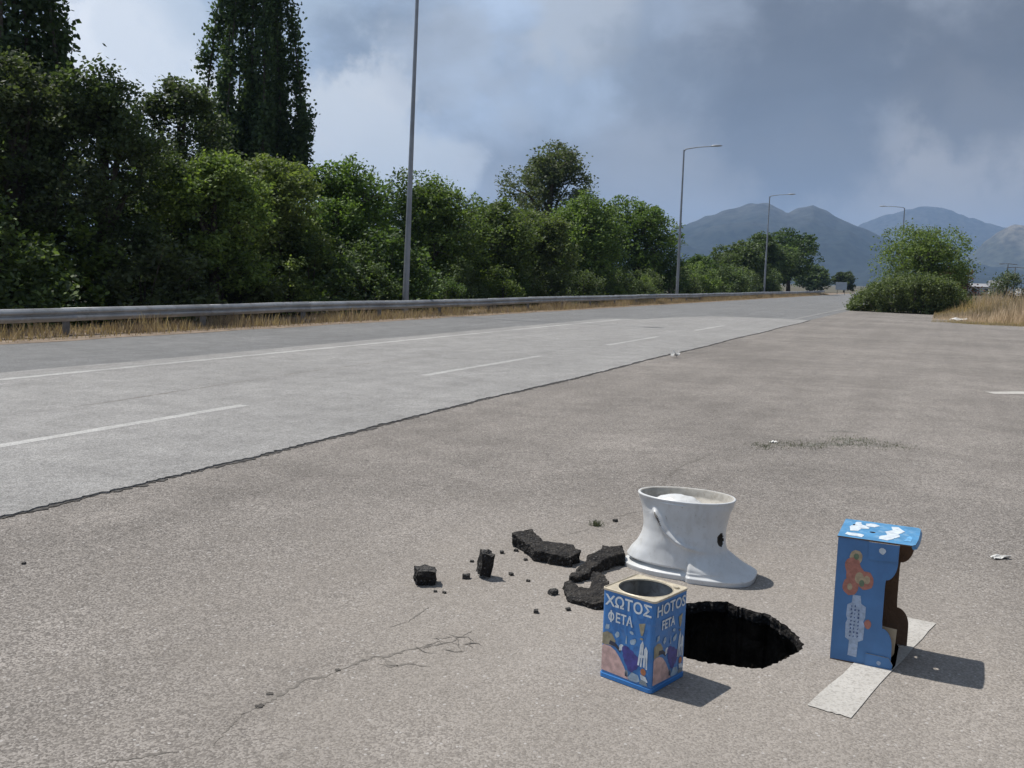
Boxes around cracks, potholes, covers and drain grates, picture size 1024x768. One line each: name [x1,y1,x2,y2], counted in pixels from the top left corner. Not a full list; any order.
crack [213,631,481,745]
pothole [683,601,804,669]
